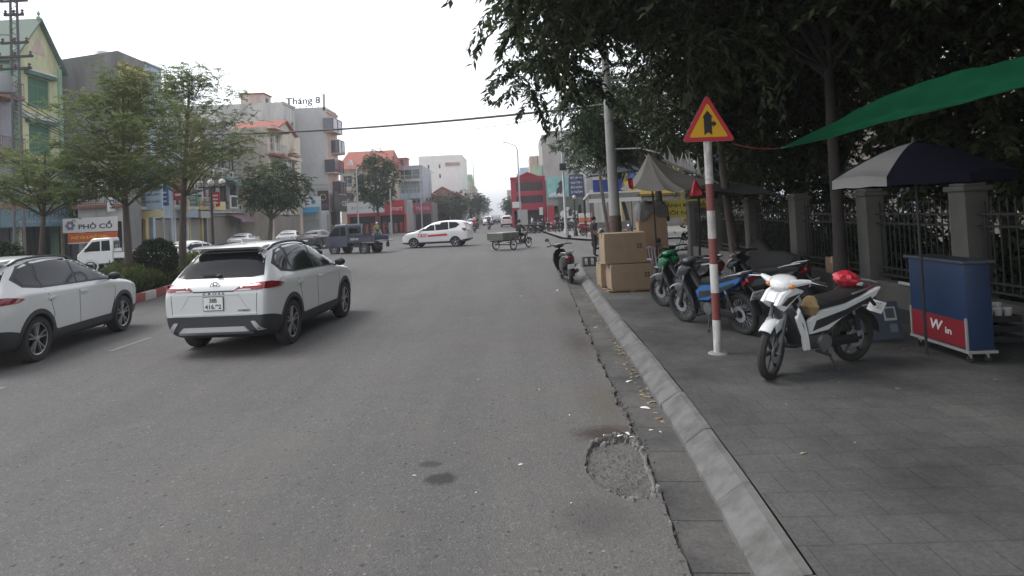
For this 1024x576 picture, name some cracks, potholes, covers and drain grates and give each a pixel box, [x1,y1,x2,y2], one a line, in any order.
crack [571,293,695,576]
pothole [584,431,662,502]
